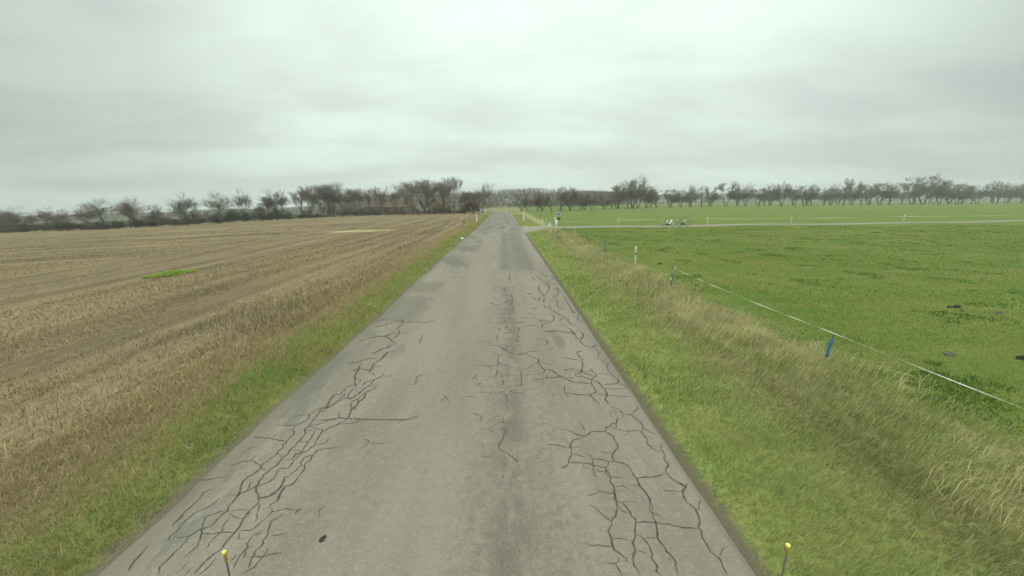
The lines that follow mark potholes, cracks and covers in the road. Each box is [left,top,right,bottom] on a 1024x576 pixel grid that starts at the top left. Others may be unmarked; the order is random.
crack [128,319,433,574]
crack [520,269,727,575]
crack [440,272,549,478]
